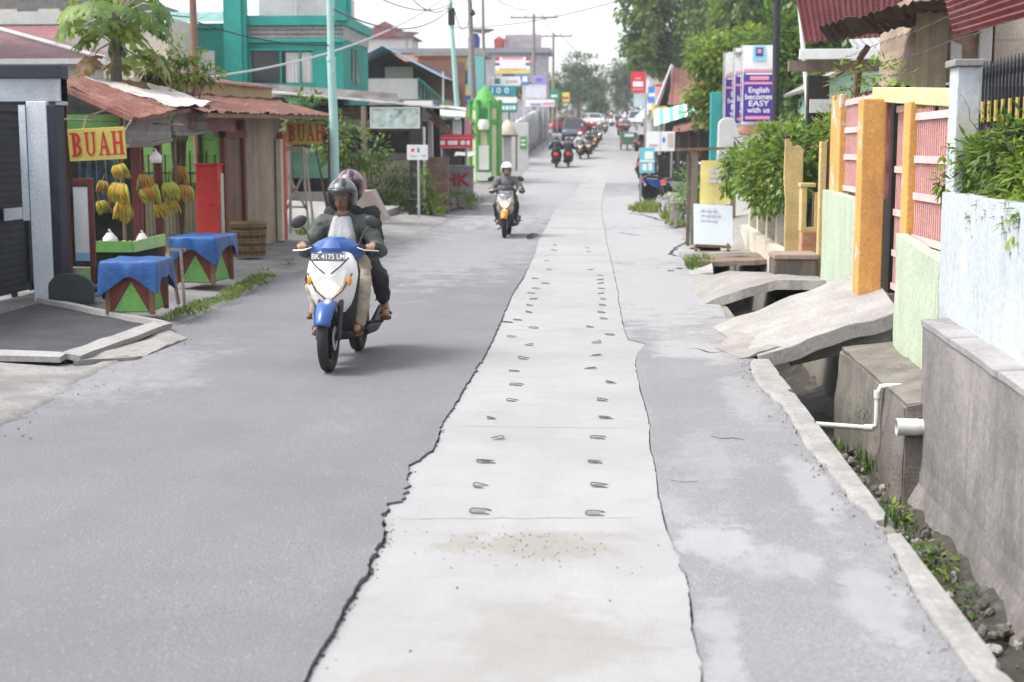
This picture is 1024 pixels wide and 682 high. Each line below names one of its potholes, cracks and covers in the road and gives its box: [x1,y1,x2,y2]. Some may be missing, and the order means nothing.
crack [603,213,698,537]
